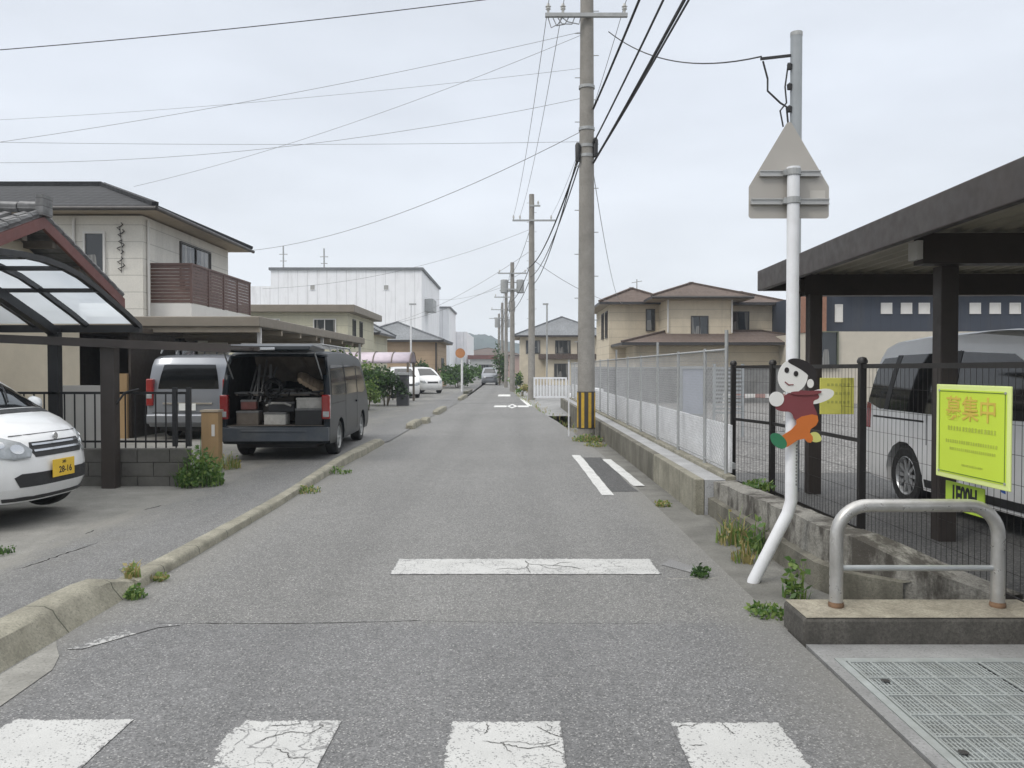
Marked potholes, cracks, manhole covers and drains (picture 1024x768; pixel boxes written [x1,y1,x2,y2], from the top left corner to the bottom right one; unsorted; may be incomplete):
crack [13,530,96,570]
crack [484,724,563,754]
crack [260,722,323,758]
drain grate [834,658,1024,768]
